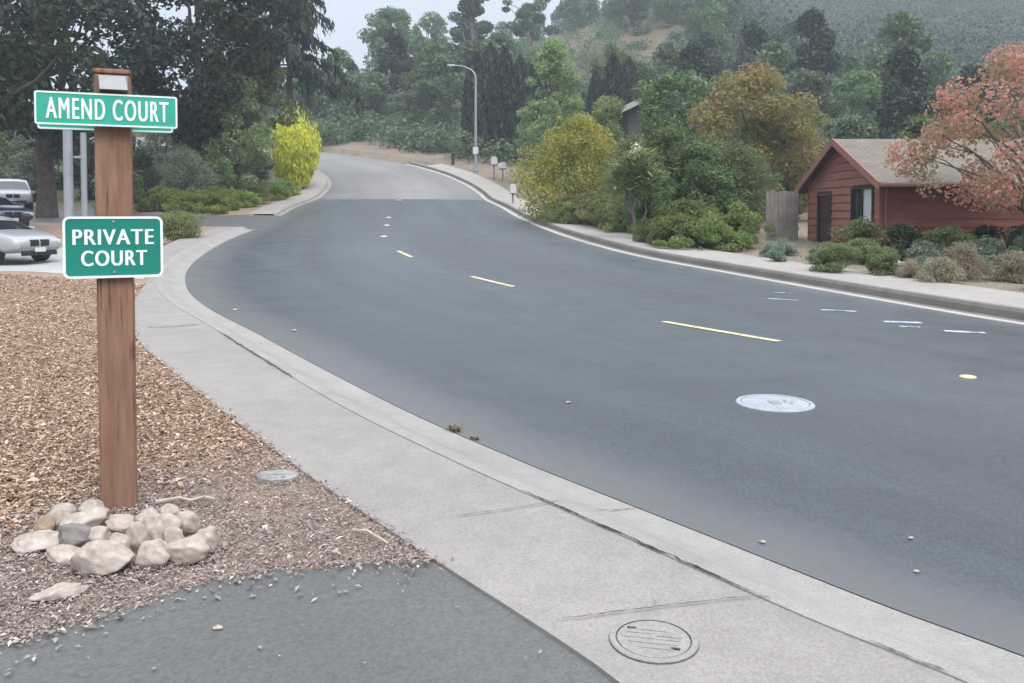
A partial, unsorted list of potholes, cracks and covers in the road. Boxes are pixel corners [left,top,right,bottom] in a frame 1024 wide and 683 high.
utility cover [256,469,300,486]
manhole cover [609,617,699,665]
manhole cover [736,394,815,412]
